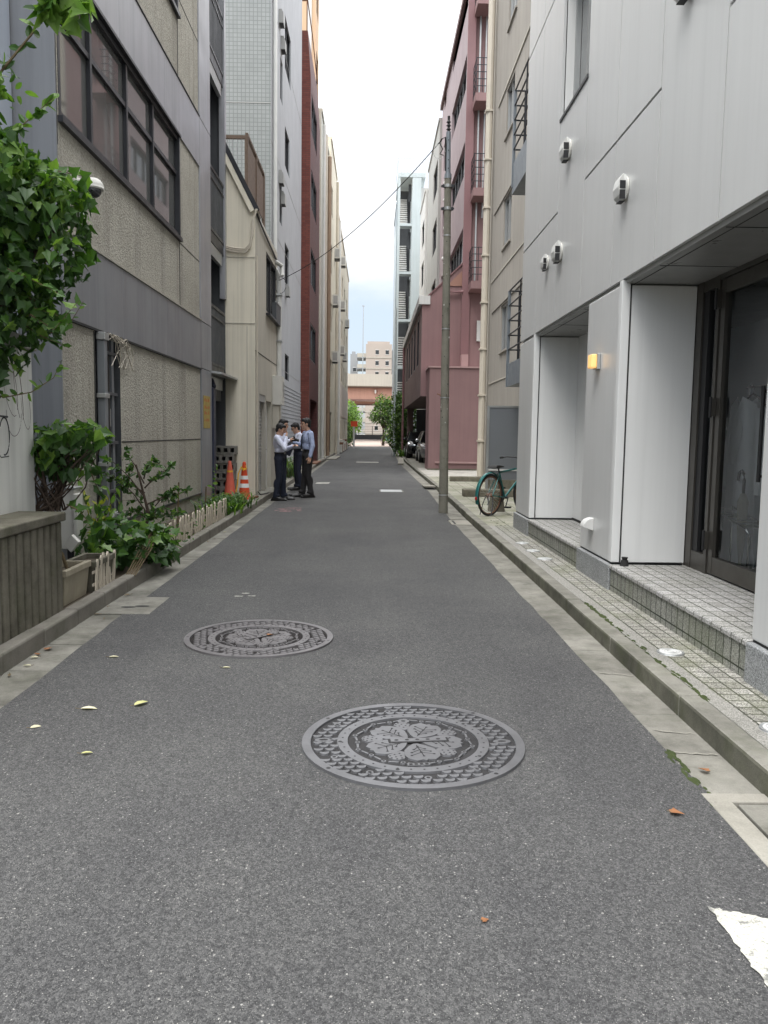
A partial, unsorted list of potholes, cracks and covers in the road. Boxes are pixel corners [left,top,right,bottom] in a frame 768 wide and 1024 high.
manhole cover [183,620,333,659]
manhole cover [301,703,525,792]
